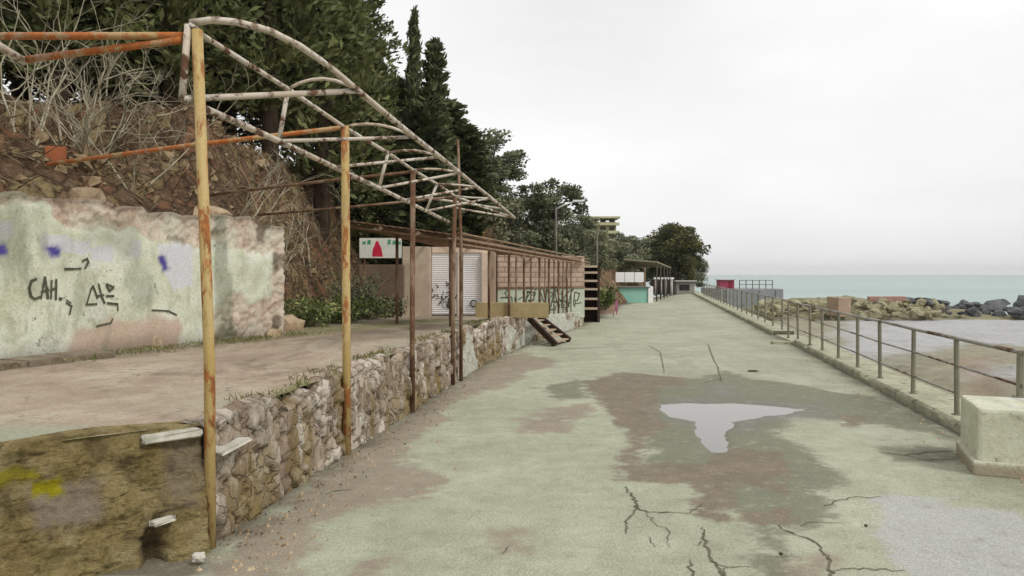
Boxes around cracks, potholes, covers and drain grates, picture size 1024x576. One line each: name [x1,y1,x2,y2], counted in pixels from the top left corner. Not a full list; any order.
crack [625,486,750,576]
crack [885,450,958,460]
crack [778,496,905,576]
